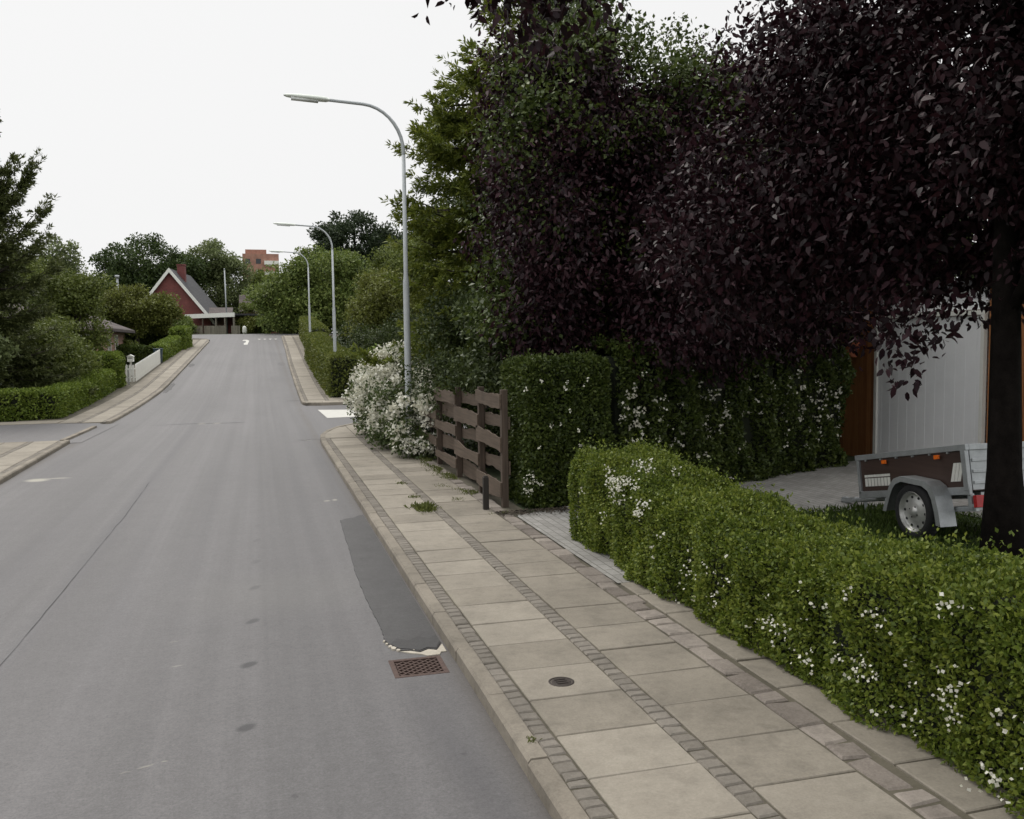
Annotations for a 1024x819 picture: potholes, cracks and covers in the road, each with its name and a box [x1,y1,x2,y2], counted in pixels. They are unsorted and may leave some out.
manhole cover [548,677,574,687]
drain grate [388,655,450,679]
